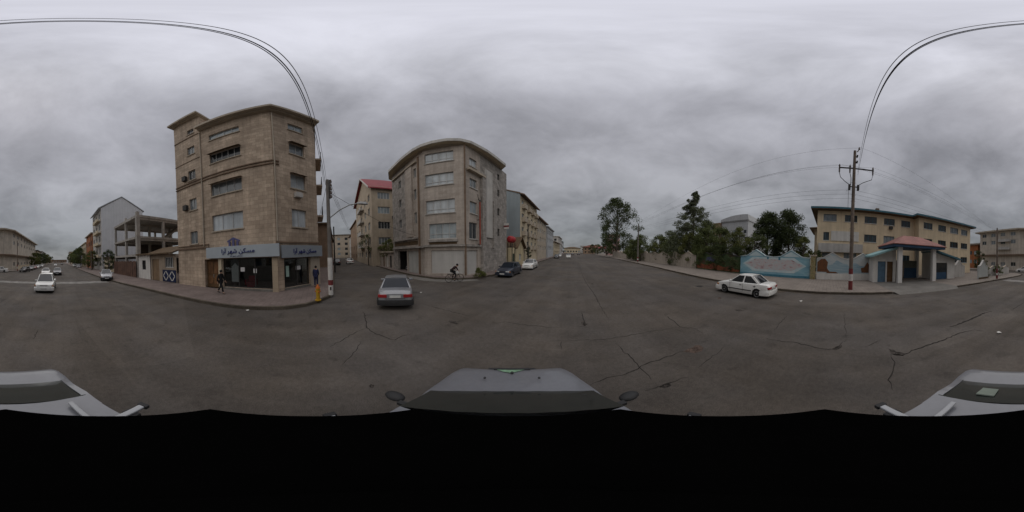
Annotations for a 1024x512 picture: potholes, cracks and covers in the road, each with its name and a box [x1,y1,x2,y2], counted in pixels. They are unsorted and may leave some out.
crack [0,301,1023,388]
